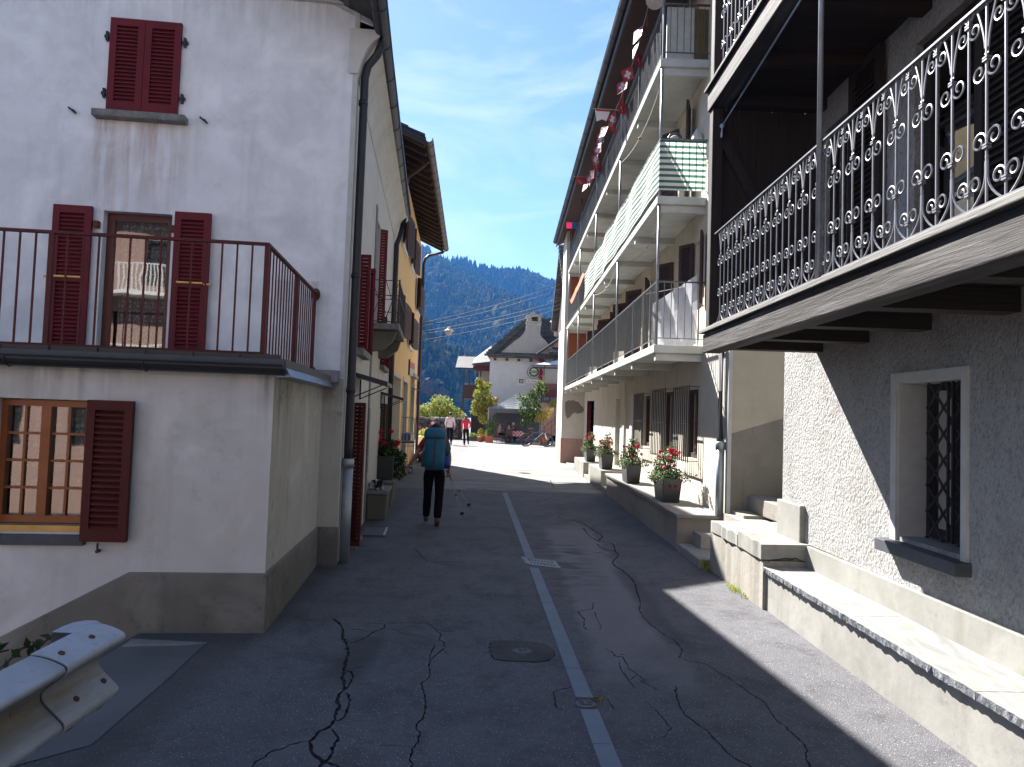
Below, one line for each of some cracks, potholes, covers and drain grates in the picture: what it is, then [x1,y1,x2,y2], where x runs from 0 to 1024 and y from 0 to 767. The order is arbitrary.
crack [251,618,453,767]
crack [553,516,811,767]
drain grate [521,556,561,569]
manhole cover [573,698,598,709]
